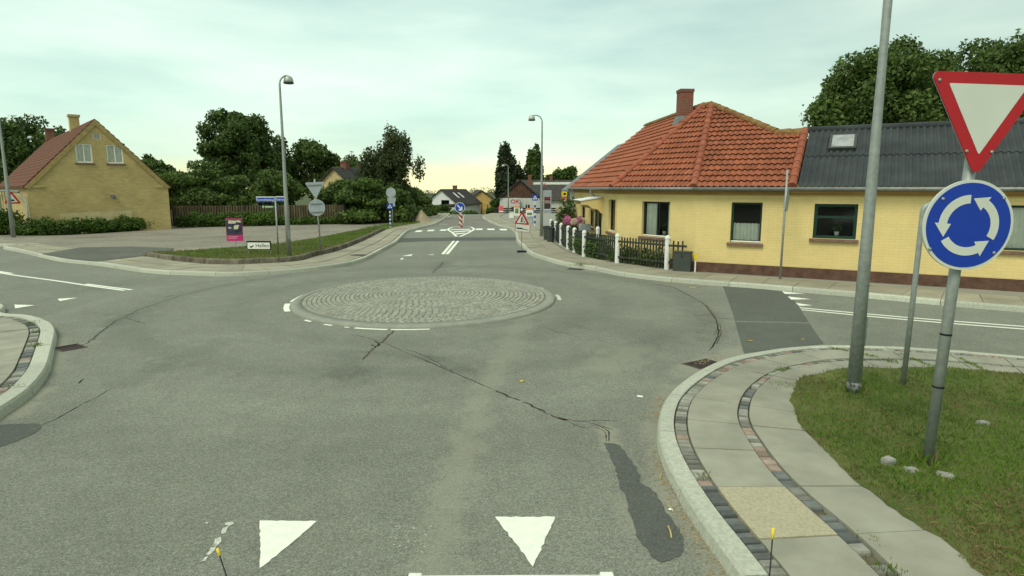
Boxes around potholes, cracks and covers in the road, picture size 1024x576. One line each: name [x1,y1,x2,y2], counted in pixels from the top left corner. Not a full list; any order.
drain grate [682,359,717,369]
crack [652,283,728,350]
drain grate [55,343,87,352]
crack [348,330,621,442]
crack [44,379,113,424]
